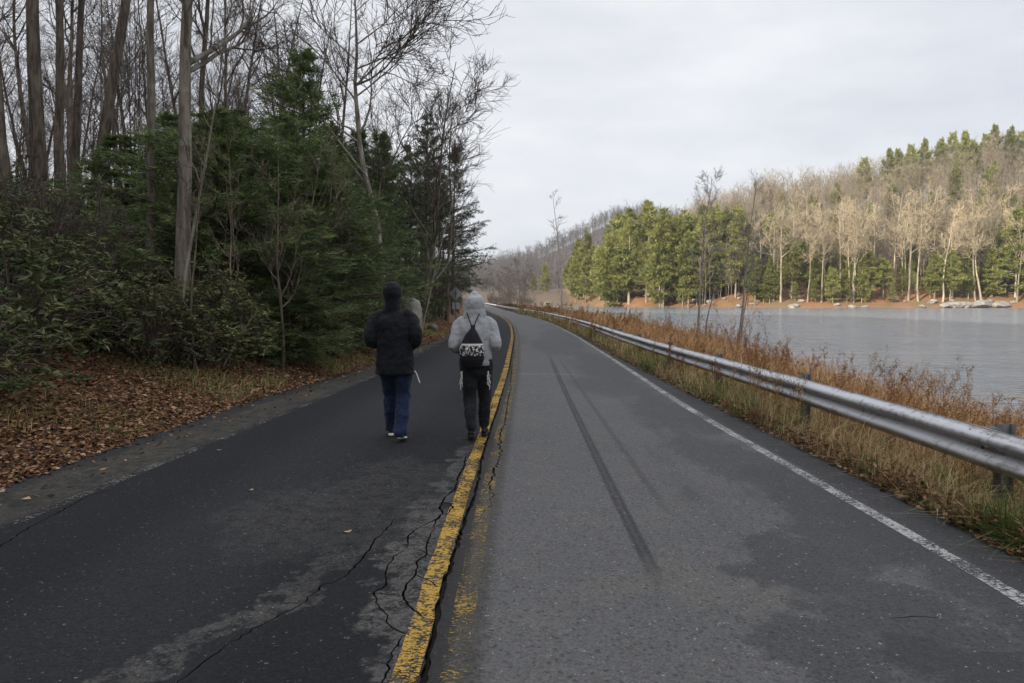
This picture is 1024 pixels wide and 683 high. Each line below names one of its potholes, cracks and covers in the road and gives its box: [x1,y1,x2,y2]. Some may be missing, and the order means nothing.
crack [0,490,106,546]
crack [481,363,513,514]
crack [176,456,467,683]
